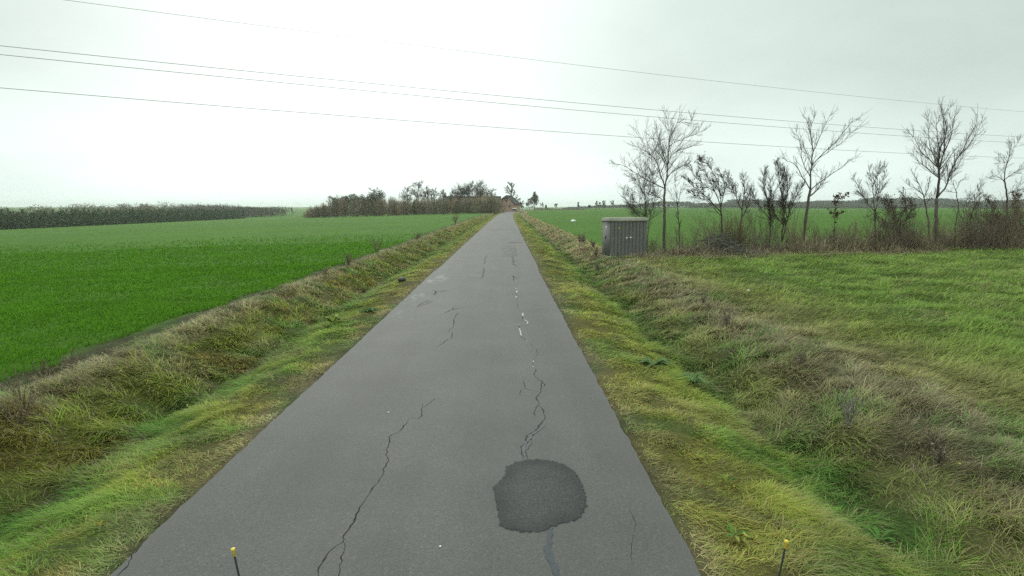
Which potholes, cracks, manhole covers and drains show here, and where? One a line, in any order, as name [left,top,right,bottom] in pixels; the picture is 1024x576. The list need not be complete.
crack [317,400,433,576]
crack [506,242,546,460]
